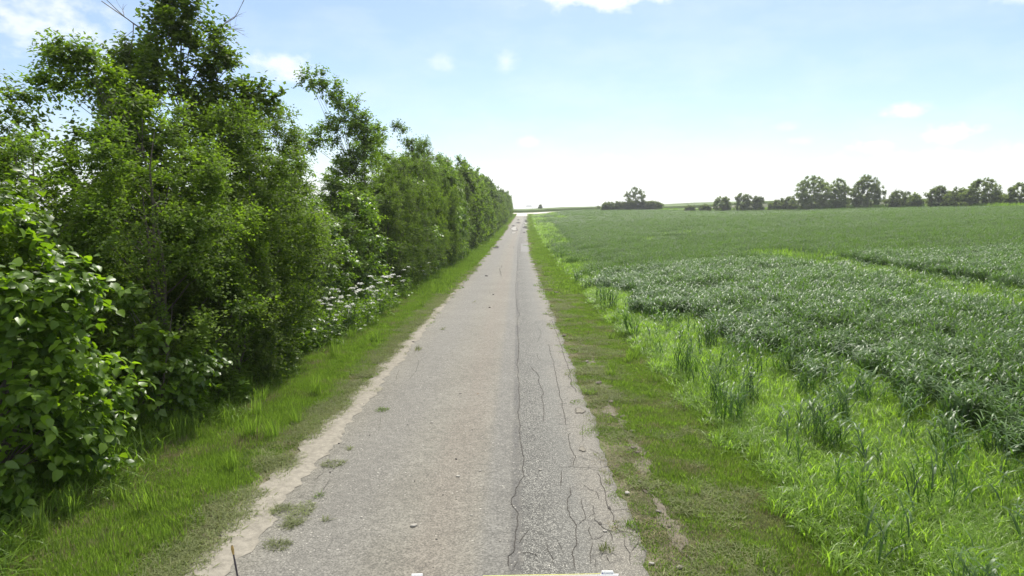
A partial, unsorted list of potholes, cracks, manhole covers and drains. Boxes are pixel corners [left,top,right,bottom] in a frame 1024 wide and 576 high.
crack [499,248,648,569]
